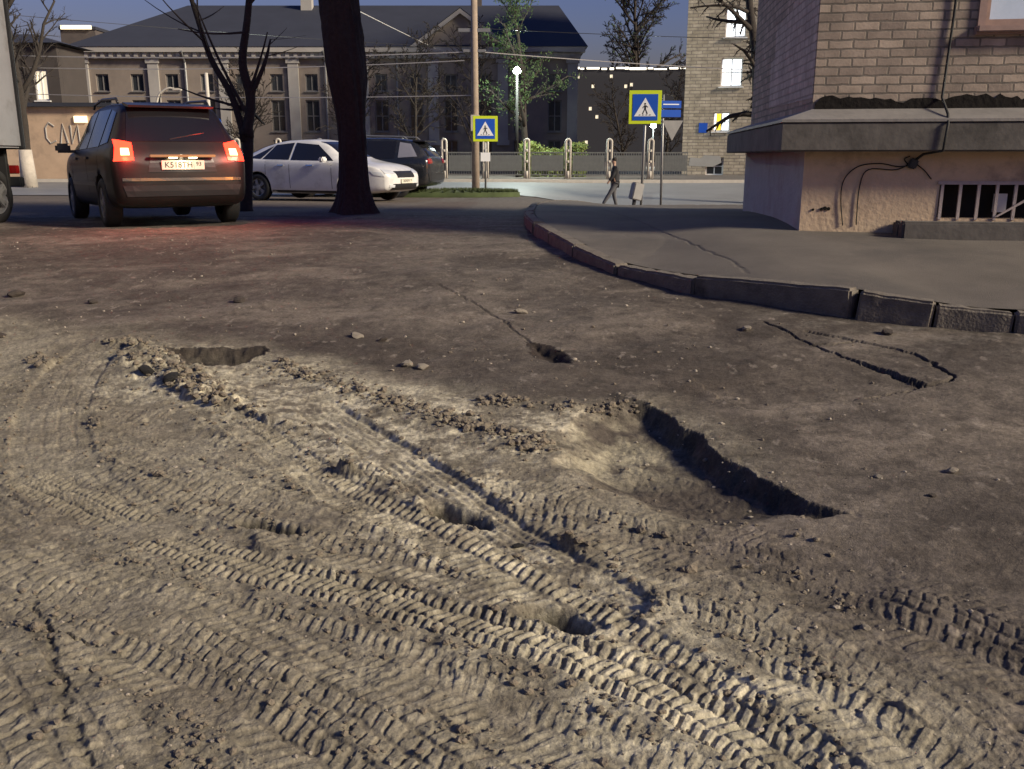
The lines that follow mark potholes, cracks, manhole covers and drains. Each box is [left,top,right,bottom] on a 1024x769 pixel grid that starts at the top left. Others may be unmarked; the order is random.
pothole [163,346,271,367]
pothole [545,393,853,531]
crack [600,209,751,274]
crack [761,321,957,399]
